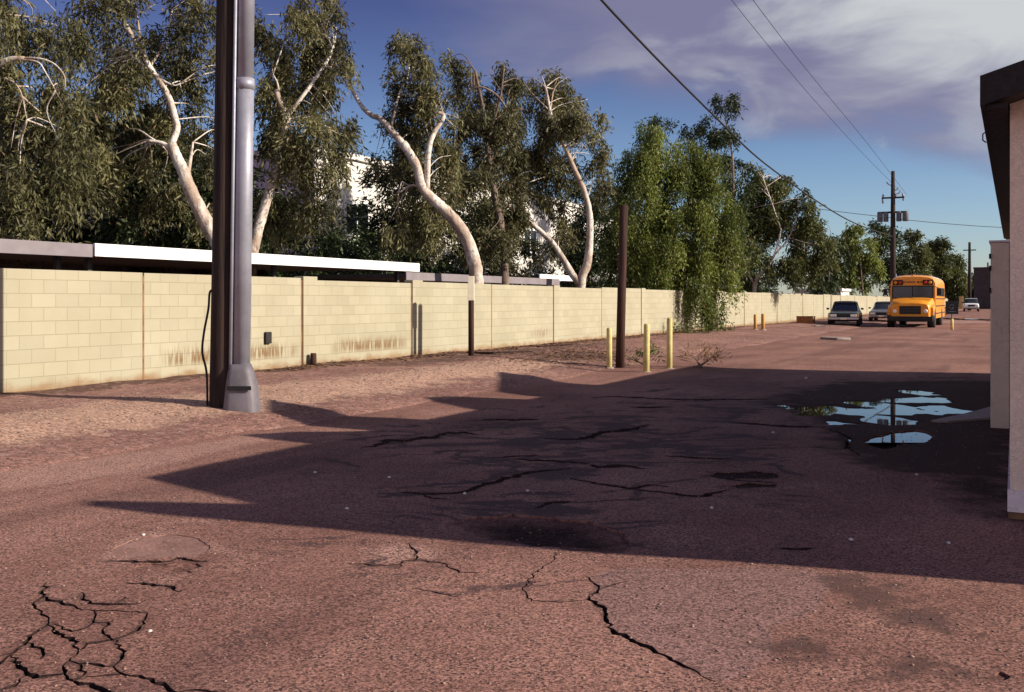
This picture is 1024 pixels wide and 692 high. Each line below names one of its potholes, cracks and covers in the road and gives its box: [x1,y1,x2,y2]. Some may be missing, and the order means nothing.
crack [362,396,771,509]
crack [350,543,479,597]
crack [521,552,716,682]
crack [0,582,219,692]
